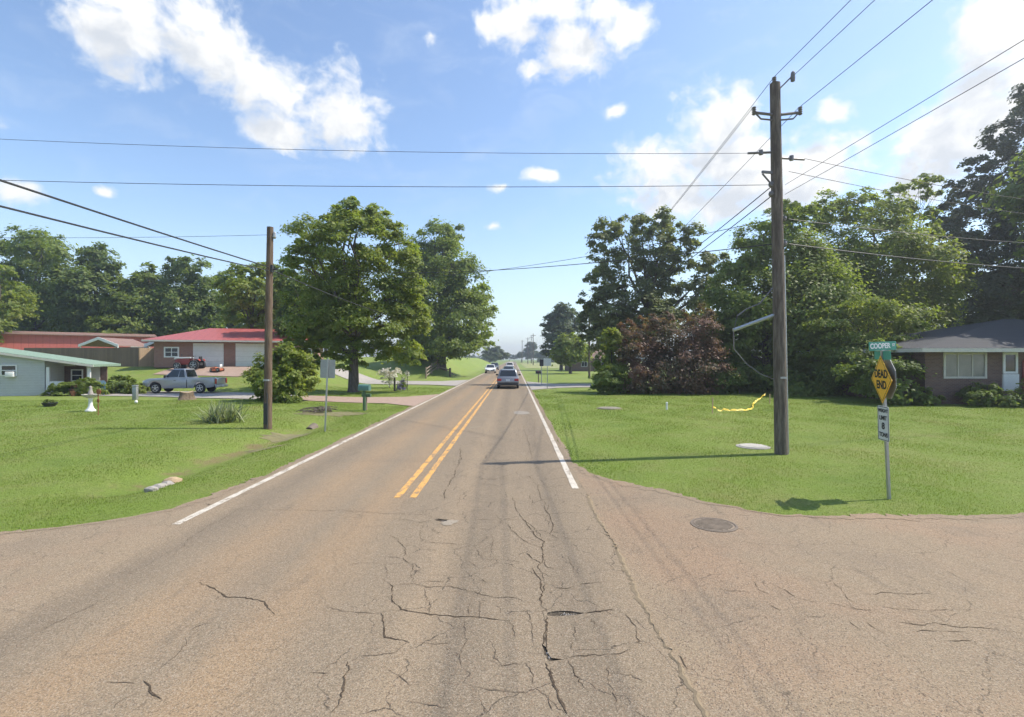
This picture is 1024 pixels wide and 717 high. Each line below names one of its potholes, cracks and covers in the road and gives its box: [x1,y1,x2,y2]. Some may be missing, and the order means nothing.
manhole cover [690,517,738,532]
crack [200,582,269,609]
crack [310,448,642,713]
crack [724,582,1014,641]
crack [107,623,207,706]
